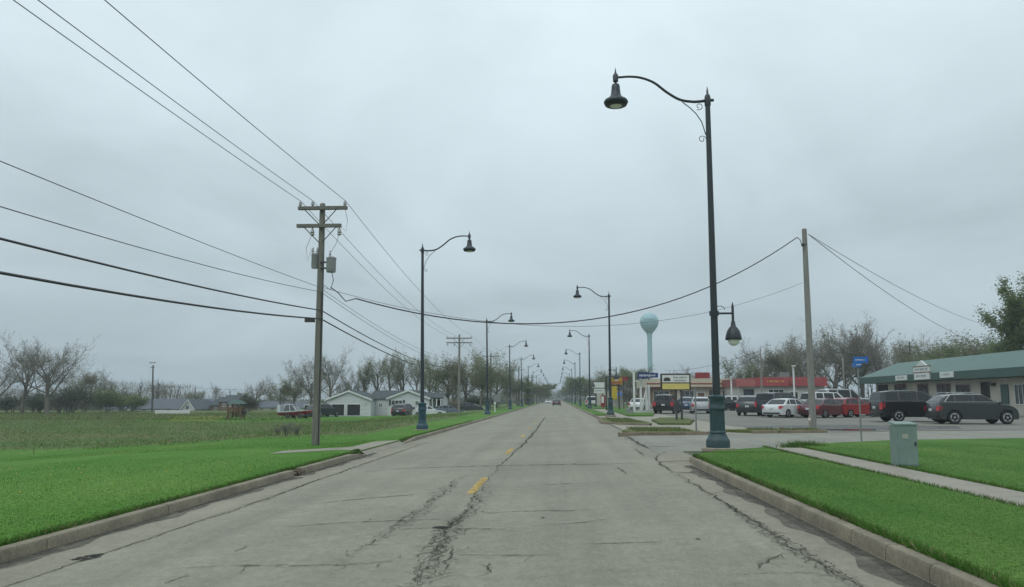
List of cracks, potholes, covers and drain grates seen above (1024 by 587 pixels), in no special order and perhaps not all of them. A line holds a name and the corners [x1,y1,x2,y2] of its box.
crack [165,481,587,587]
crack [722,503,863,587]
